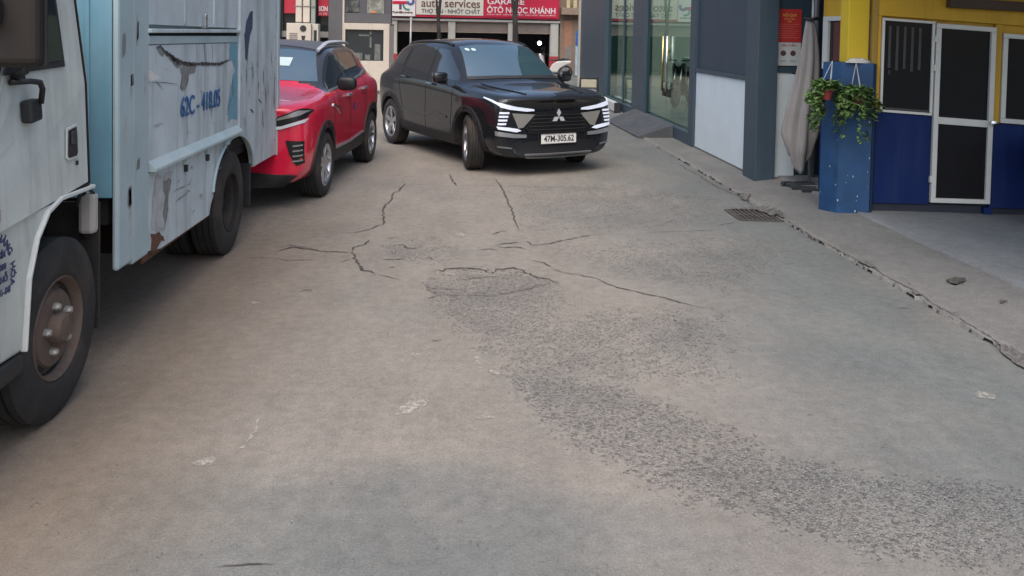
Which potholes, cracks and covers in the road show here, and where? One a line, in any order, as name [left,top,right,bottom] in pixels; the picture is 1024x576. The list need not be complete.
crack [257,181,408,280]
drain grate [724,209,784,222]
crack [426,231,712,309]
pothole [426,269,549,296]
